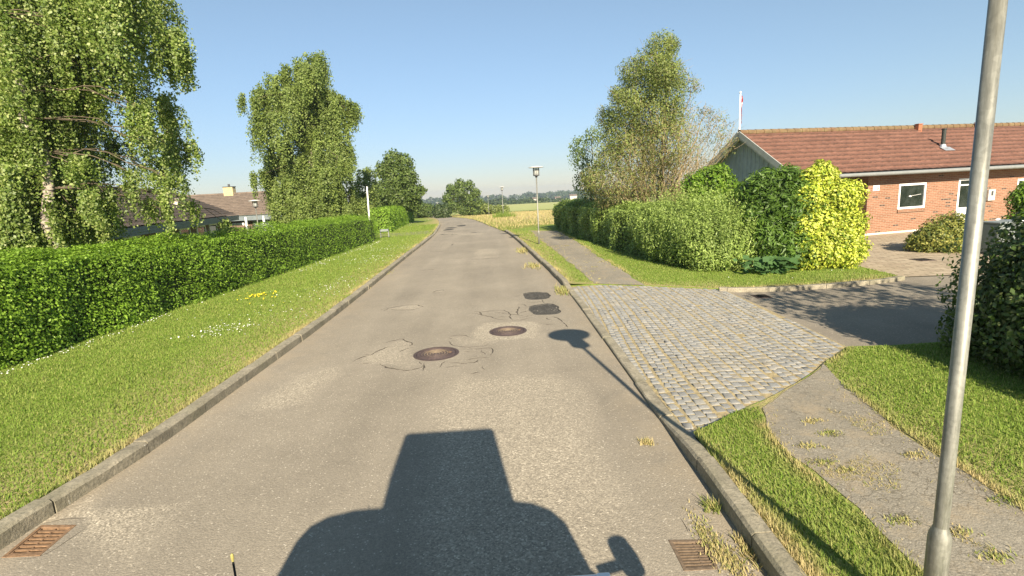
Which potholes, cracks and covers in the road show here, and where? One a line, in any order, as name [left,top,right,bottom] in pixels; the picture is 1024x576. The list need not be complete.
crack [356,335,494,374]
crack [473,300,568,327]
manhole cover [413,347,459,361]
manhole cover [489,326,527,336]
drain grate [1,525,76,558]
drain grate [668,539,718,571]
